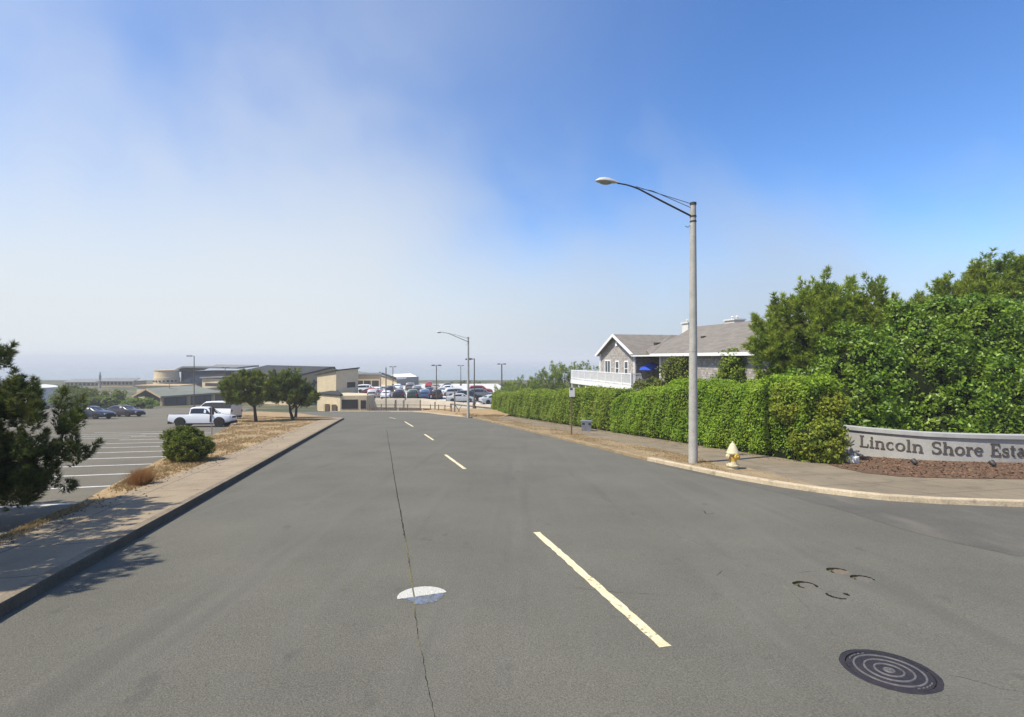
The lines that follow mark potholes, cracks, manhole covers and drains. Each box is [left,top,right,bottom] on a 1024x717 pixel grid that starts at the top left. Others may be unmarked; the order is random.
crack [387,433,435,717]
manhole cover [839,649,944,695]
